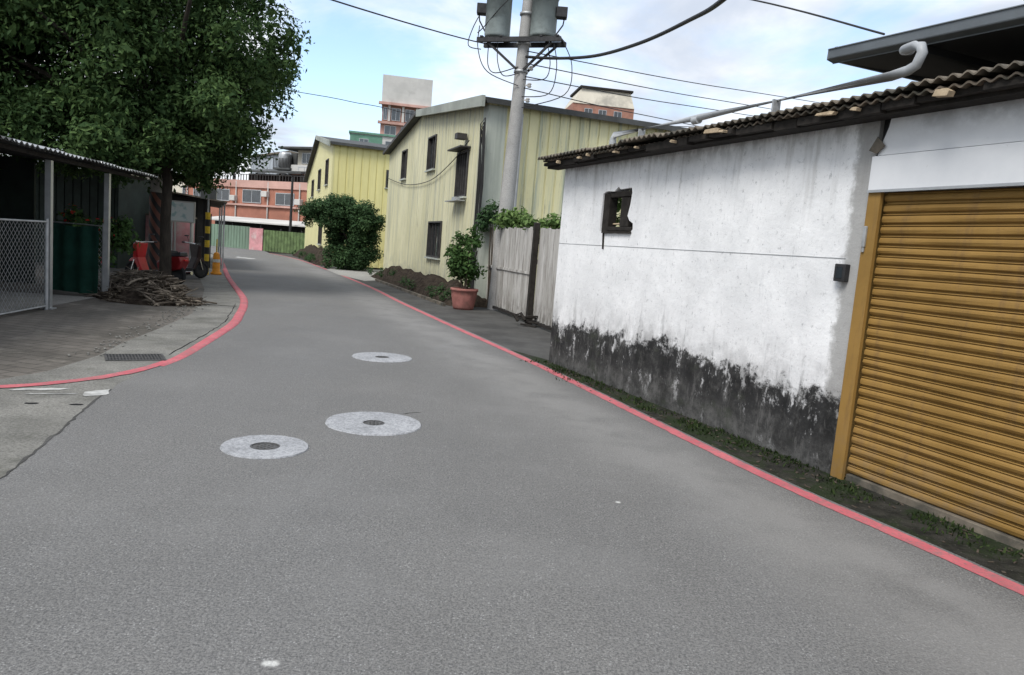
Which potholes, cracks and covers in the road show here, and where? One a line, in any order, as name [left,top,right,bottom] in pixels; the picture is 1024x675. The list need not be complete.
manhole cover [220,435,309,459]
manhole cover [325,412,421,436]
manhole cover [352,352,412,363]
